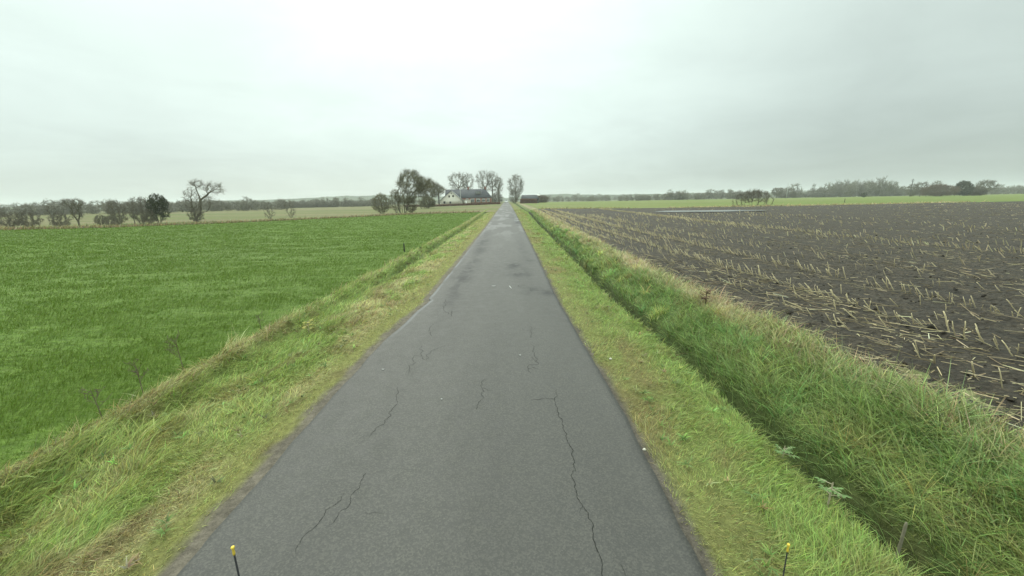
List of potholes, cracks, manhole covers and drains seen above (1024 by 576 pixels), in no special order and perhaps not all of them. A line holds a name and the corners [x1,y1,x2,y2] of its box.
crack [295,475,383,552]
crack [537,389,603,576]
